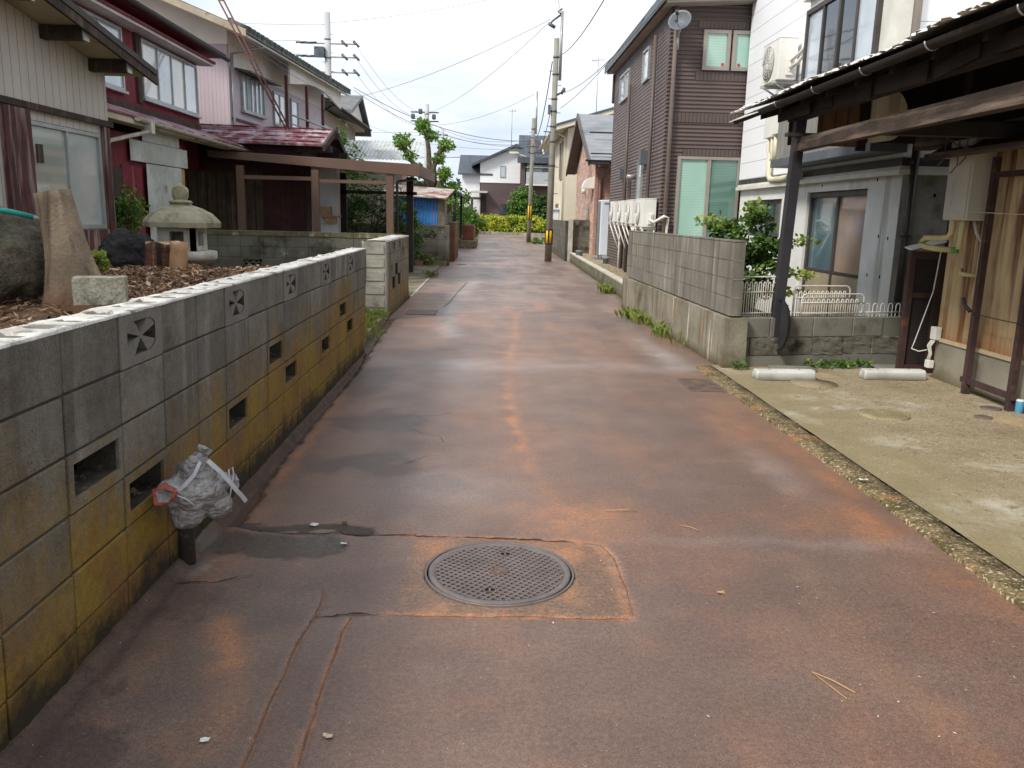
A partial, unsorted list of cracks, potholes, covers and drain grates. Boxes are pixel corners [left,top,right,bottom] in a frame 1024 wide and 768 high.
crack [240,530,633,768]
manhole cover [790,379,838,389]
manhole cover [424,542,575,608]
manhole cover [858,408,910,421]
